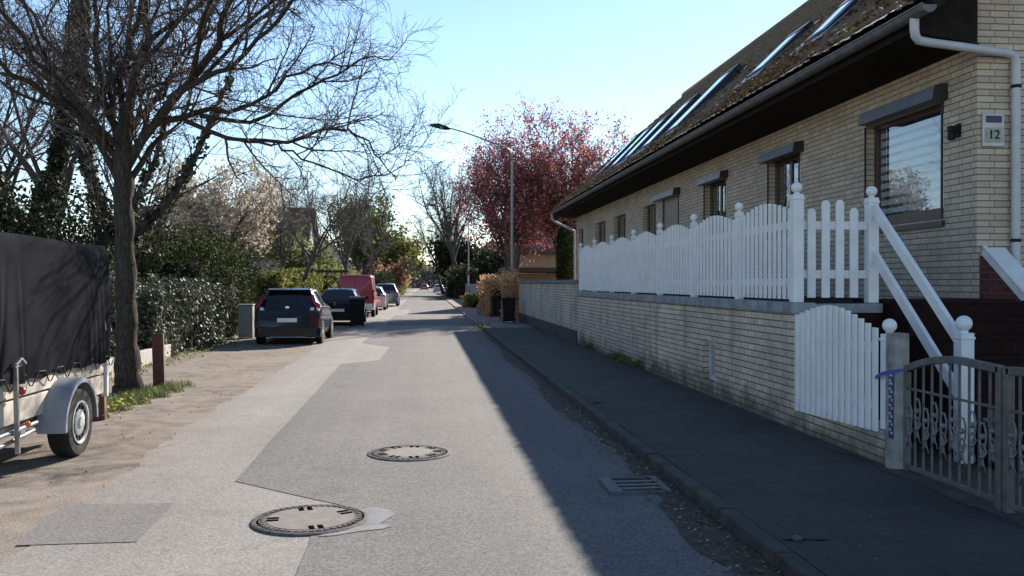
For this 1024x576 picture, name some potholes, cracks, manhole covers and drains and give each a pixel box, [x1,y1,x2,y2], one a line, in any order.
manhole cover [250,504,369,537]
manhole cover [367,445,451,462]
drain grate [598,476,672,495]
